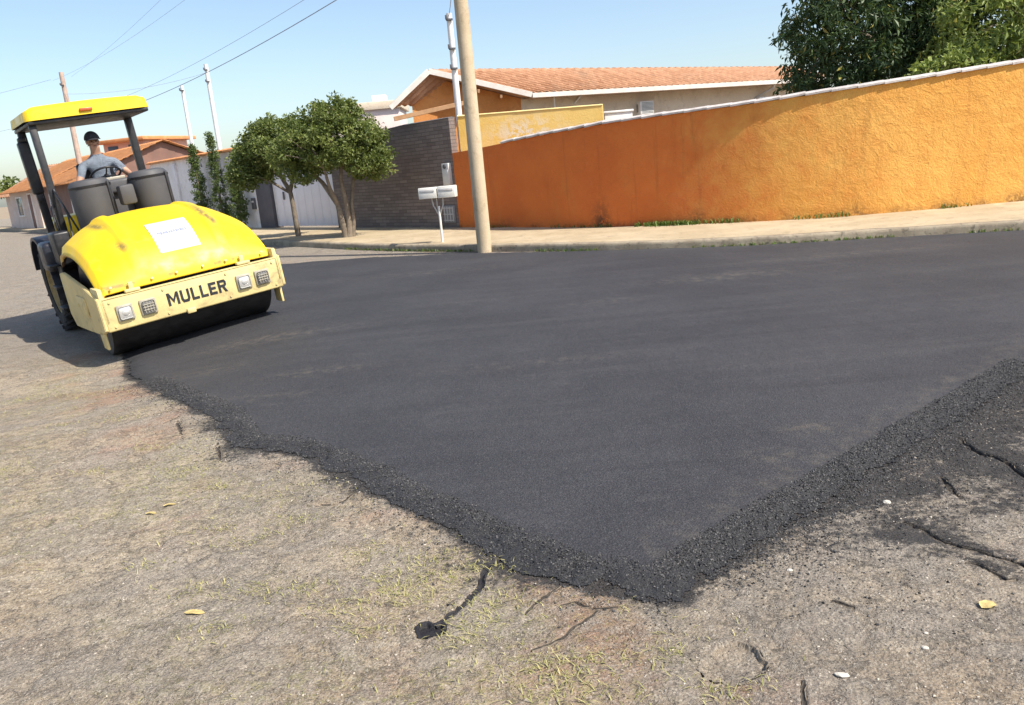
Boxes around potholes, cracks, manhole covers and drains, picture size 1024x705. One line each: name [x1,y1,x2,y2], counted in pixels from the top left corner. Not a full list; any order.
crack [525,585,618,652]
crack [939,477,962,498]
crack [958,438,1024,478]
crack [904,522,1024,582]
